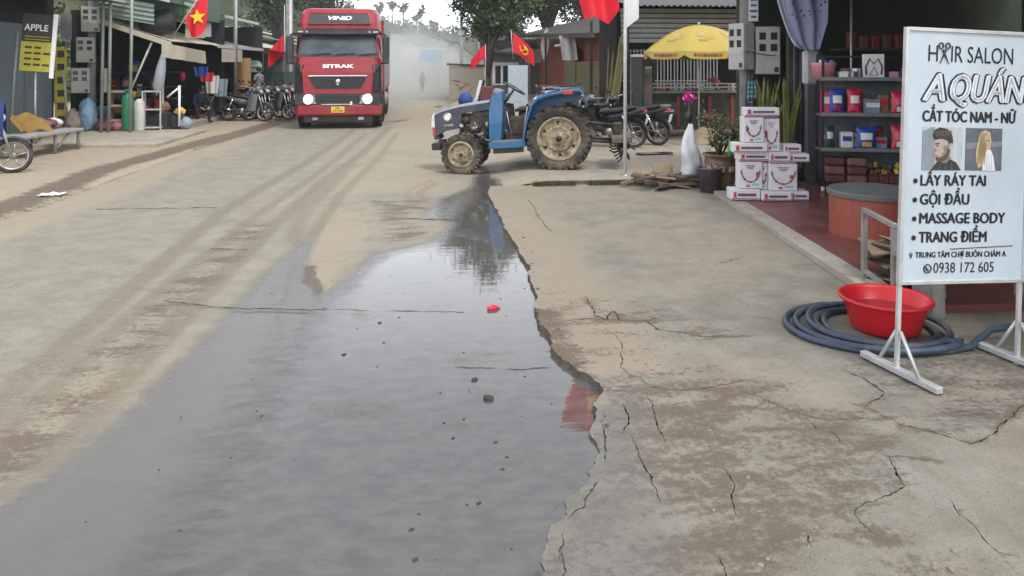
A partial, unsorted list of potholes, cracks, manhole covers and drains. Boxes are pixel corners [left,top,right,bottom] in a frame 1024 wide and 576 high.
crack [559,297,1024,576]
